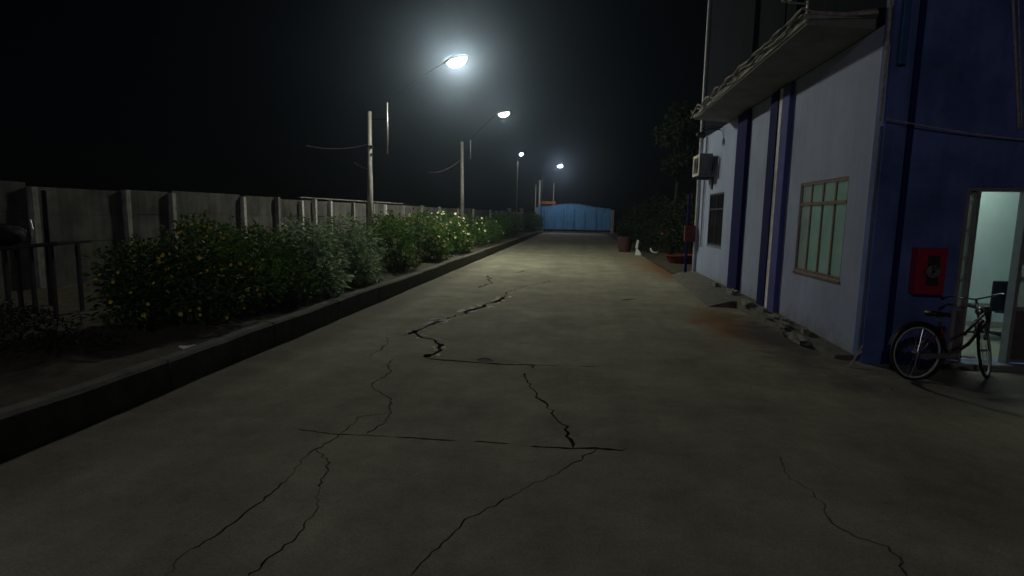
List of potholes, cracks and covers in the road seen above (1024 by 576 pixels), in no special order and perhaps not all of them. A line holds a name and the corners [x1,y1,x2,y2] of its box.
crack [164,271,625,576]
crack [779,456,908,576]
